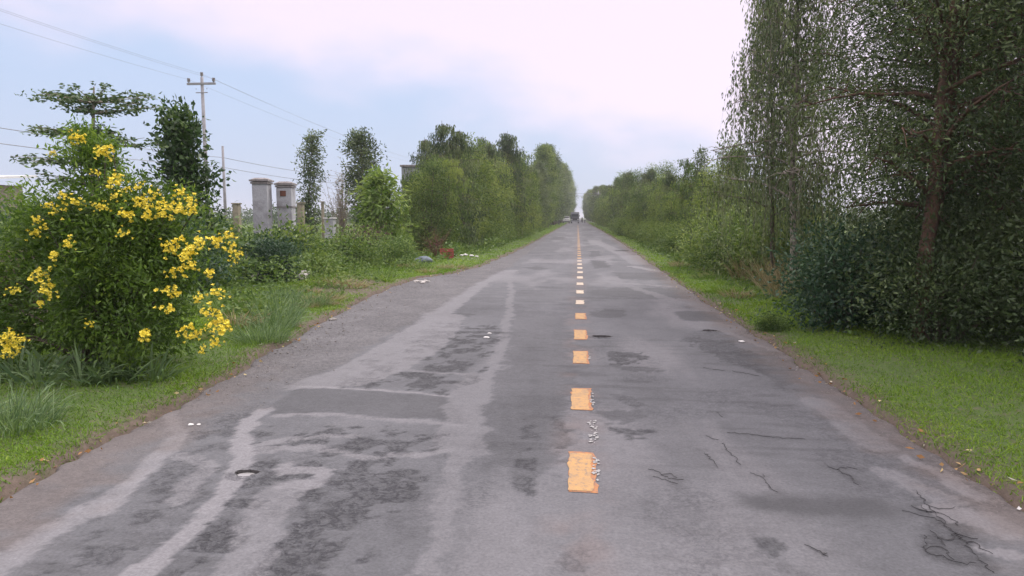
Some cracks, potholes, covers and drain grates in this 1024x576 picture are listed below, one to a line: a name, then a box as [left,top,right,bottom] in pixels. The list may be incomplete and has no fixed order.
pothole [224,467,268,481]
crack [902,492,994,573]
crack [705,432,803,492]
